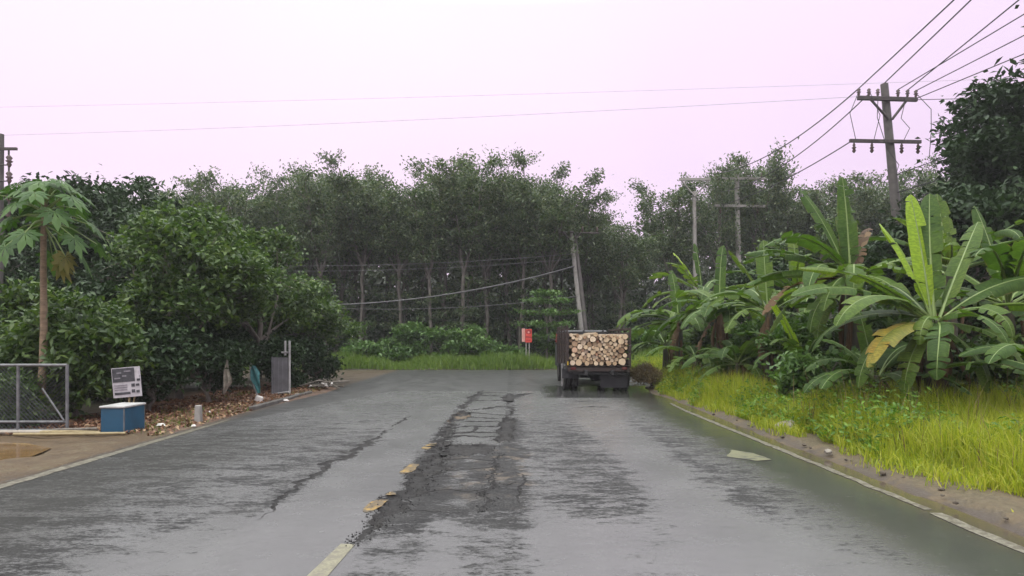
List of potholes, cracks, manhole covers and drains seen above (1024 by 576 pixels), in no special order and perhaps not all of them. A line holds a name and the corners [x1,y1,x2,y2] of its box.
crack [261,391,542,544]
